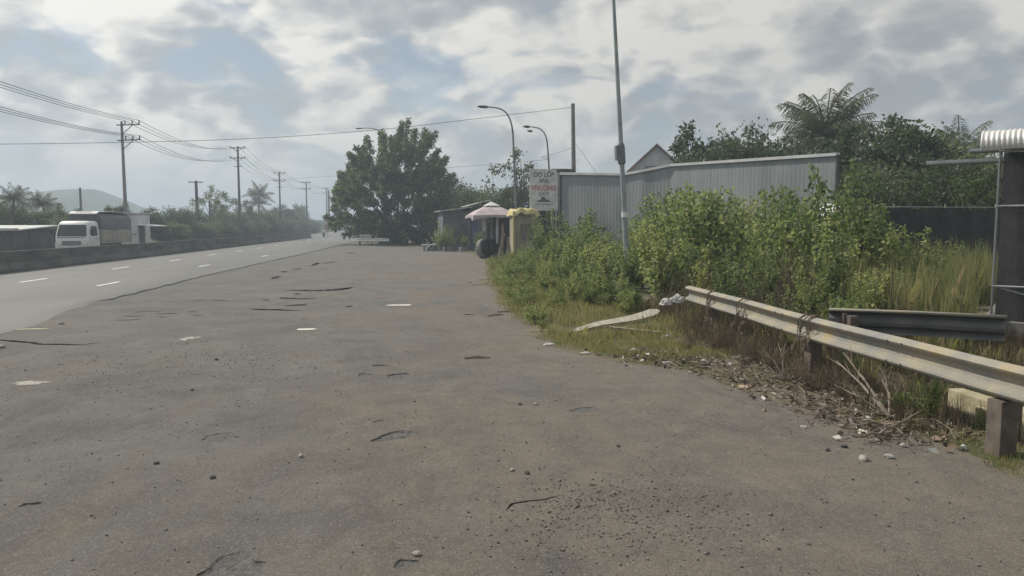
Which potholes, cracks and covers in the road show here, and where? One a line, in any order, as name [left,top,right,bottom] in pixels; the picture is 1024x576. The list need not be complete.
pothole [196,551,268,576]
crack [506,495,560,510]
pothole [394,559,419,569]
pothole [370,430,419,442]
